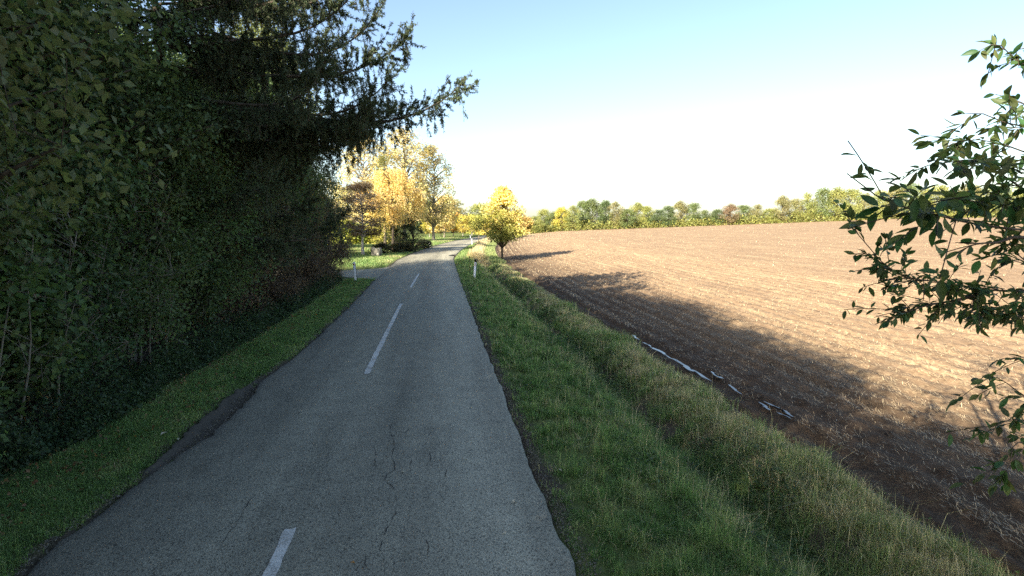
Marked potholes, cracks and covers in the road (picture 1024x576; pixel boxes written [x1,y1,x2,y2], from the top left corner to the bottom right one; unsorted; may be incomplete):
crack [364,426,447,572]
